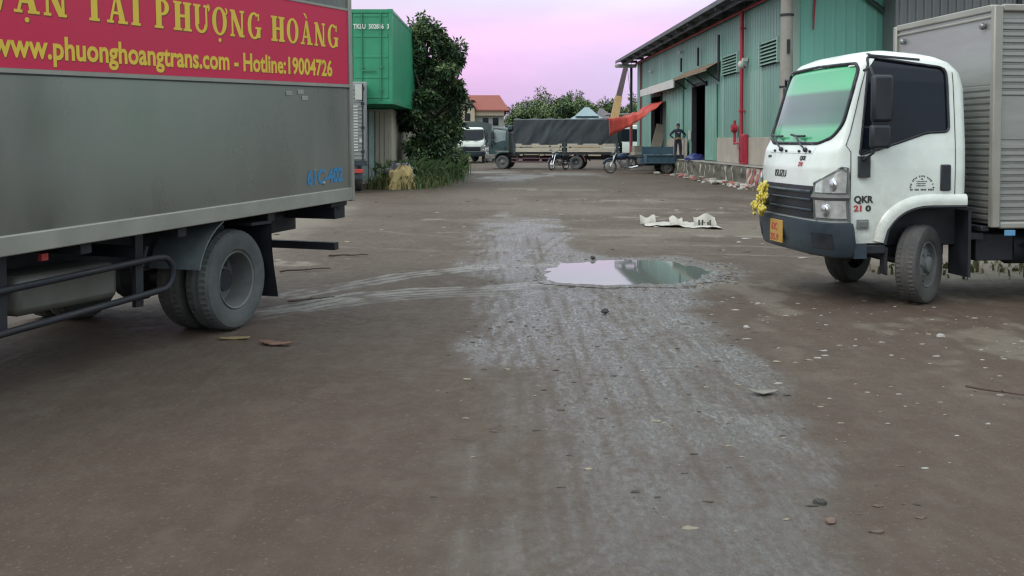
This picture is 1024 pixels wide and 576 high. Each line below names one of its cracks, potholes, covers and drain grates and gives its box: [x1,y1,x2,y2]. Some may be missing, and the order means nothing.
pothole [535,258,733,288]
